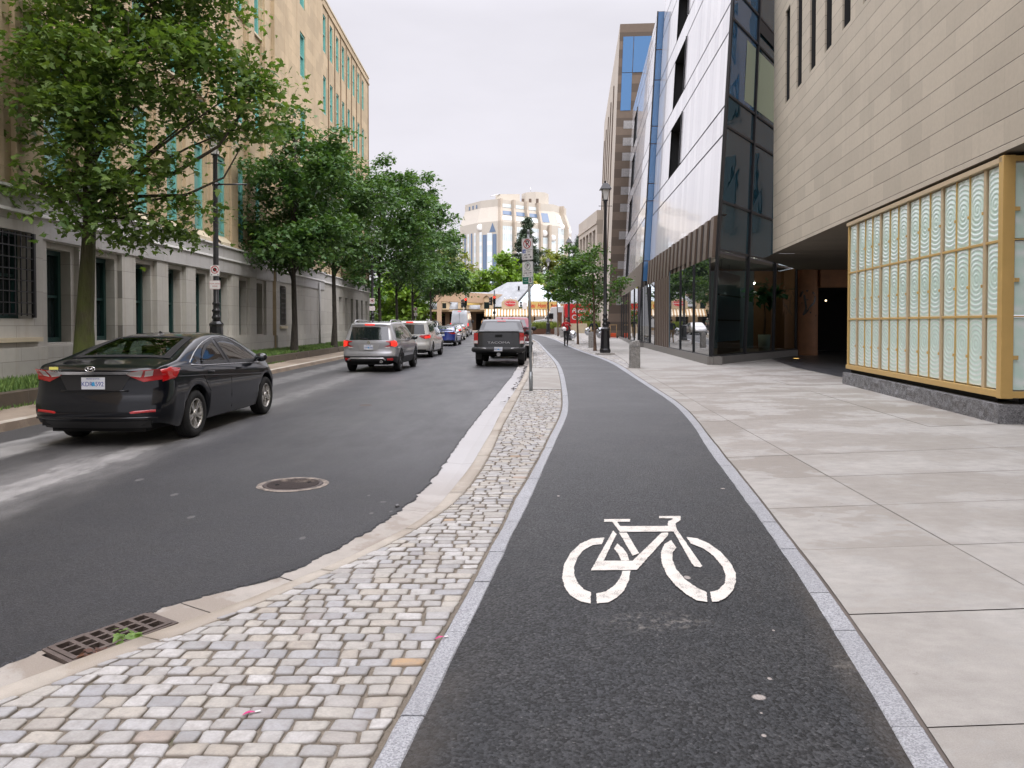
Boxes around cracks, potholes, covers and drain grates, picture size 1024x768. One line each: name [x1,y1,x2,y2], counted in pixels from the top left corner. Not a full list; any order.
drain grate [42,612,178,664]
manhole cover [256,477,329,492]
